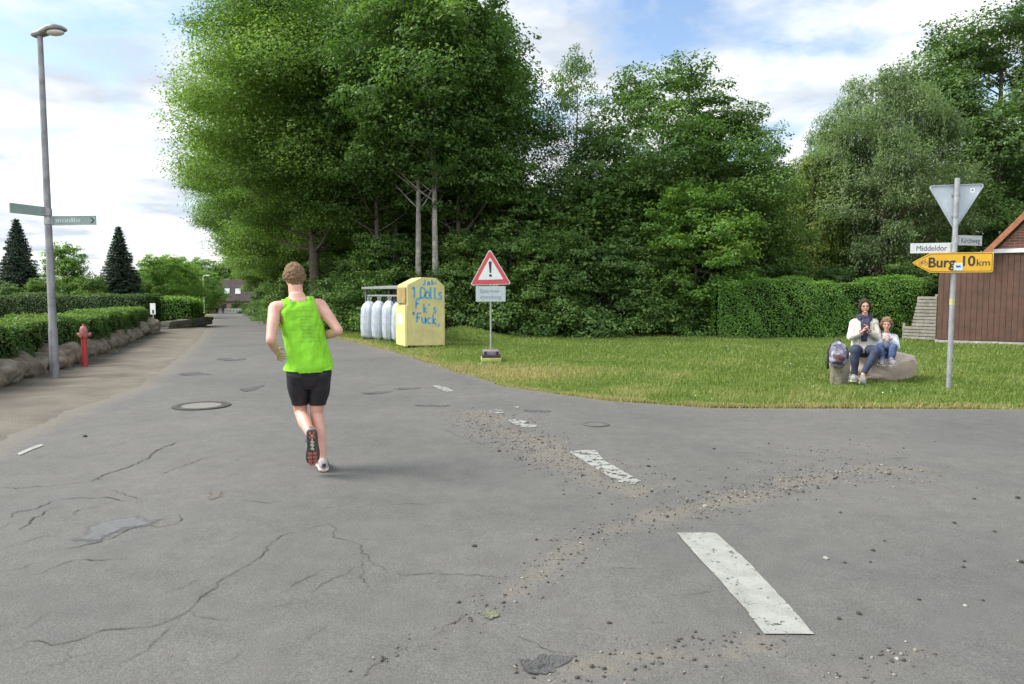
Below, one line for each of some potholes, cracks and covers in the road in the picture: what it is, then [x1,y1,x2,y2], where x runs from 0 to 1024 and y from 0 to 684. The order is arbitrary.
crack [9,514,182,573]
pothole [520,654,572,674]
crack [264,523,512,607]
crack [1,442,219,544]
crack [3,532,291,678]
manhole cover [171,401,231,411]
